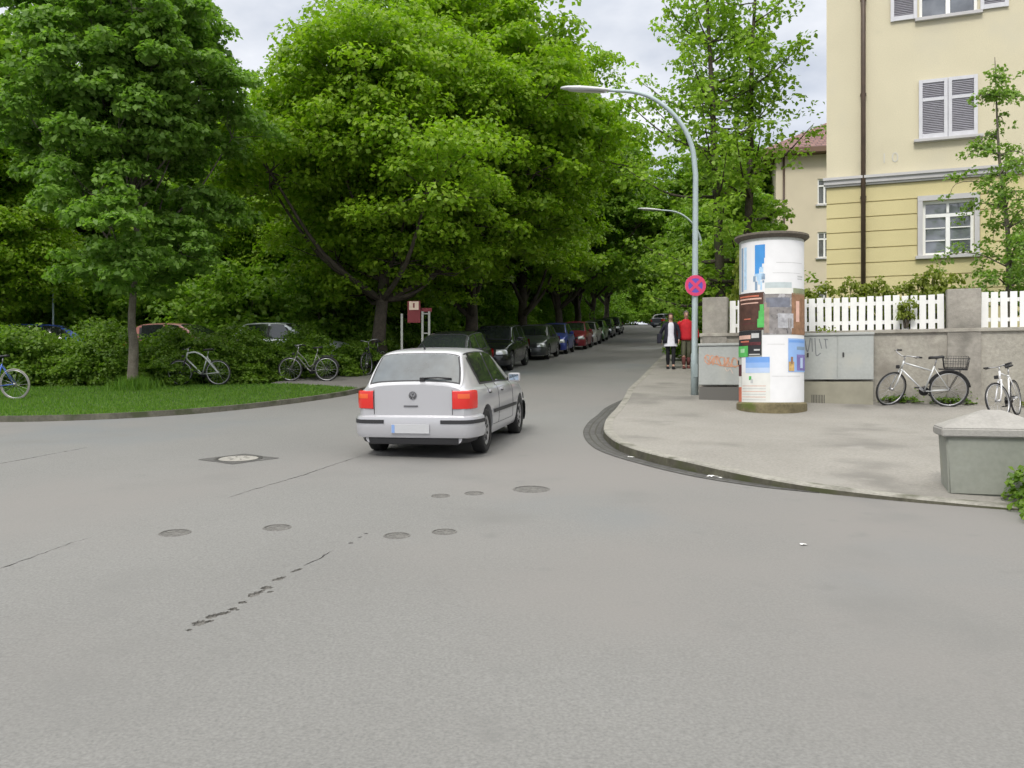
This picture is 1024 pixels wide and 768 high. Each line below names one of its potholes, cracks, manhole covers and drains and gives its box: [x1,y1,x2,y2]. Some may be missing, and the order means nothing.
crack [187,533,368,631]
manhole cover [198,454,277,464]
